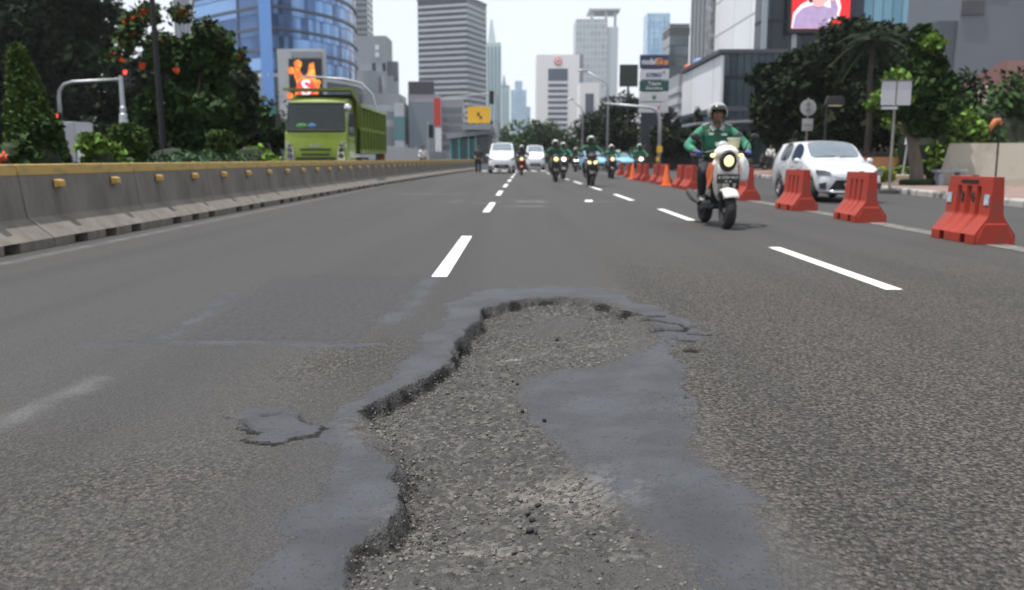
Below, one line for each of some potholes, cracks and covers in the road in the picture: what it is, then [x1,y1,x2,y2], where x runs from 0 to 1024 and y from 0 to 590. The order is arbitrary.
crack [633,313,712,353]
pothole [338,297,765,590]
